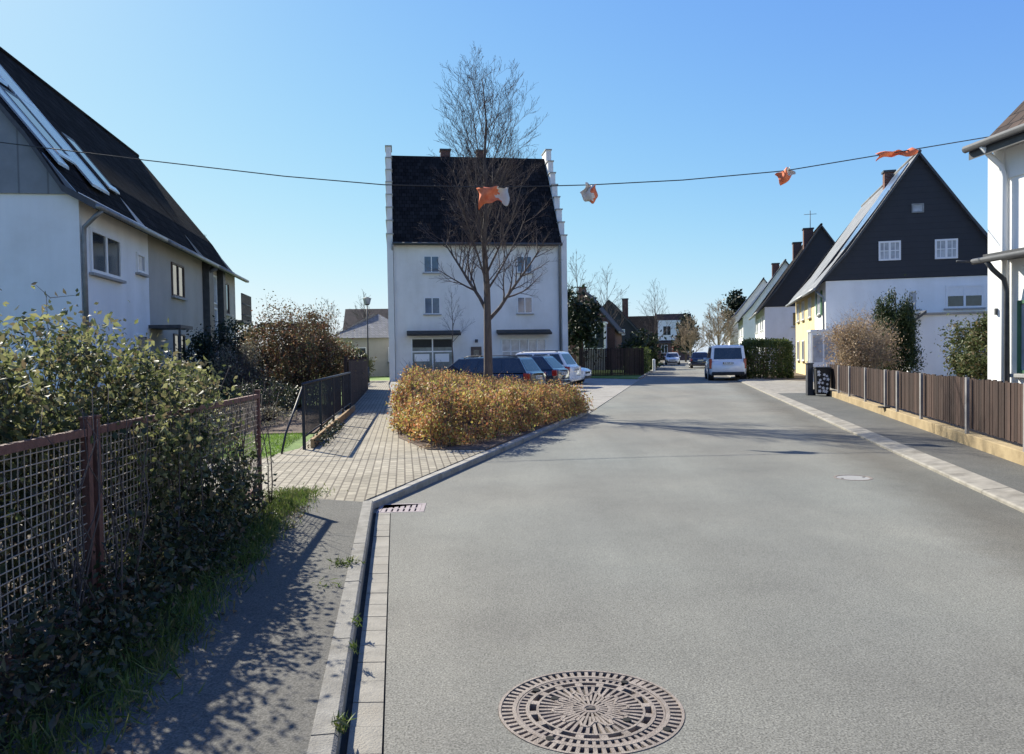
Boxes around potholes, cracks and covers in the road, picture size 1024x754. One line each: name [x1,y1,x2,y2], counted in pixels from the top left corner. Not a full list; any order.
manhole cover [498,670,685,754]
drain grate [376,503,426,514]
